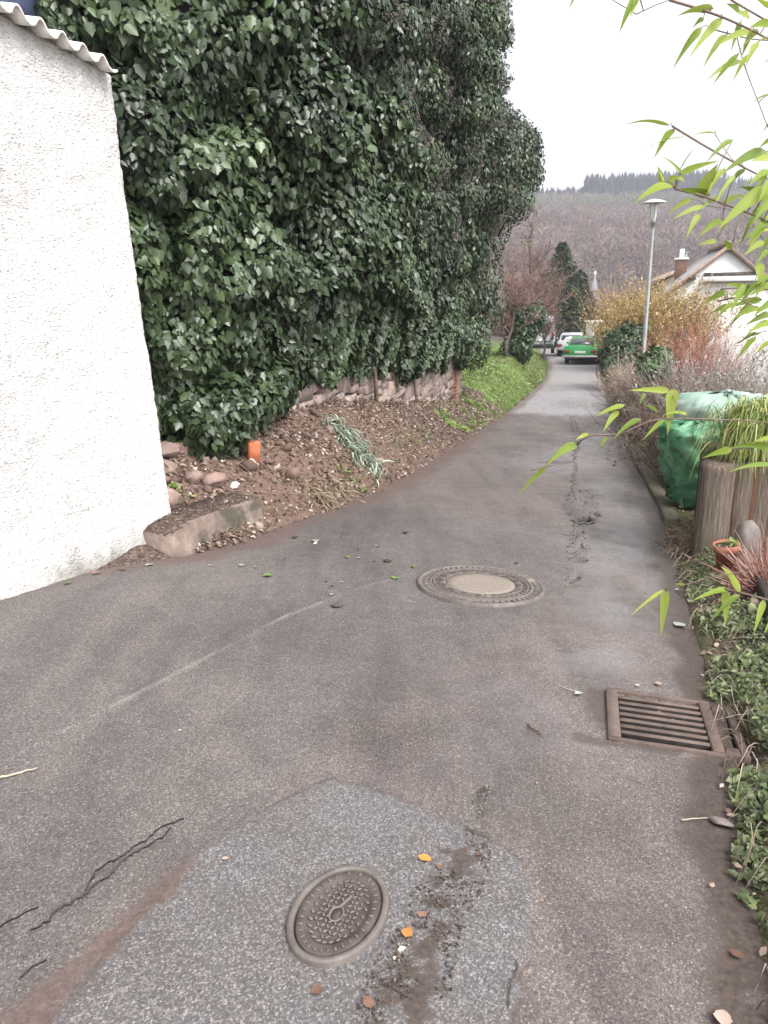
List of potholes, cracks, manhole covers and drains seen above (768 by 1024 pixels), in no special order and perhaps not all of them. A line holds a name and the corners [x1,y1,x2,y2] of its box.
drain grate [606,688,751,766]
manhole cover [417,565,545,608]
crack [0,818,184,979]
